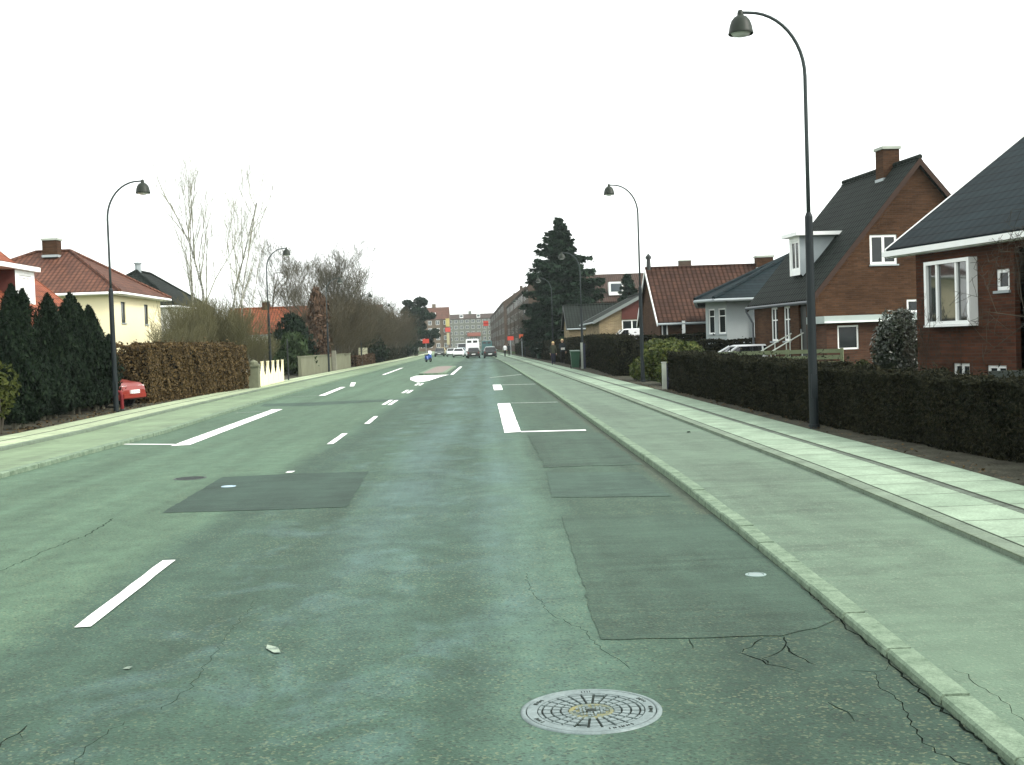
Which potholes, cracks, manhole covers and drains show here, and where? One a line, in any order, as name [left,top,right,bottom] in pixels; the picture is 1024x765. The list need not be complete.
crack [803,589,1024,765]
crack [161,597,257,709]
manhole cover [520,689,662,735]
crack [740,637,816,671]
crack [0,518,113,571]
crack [526,573,628,667]
